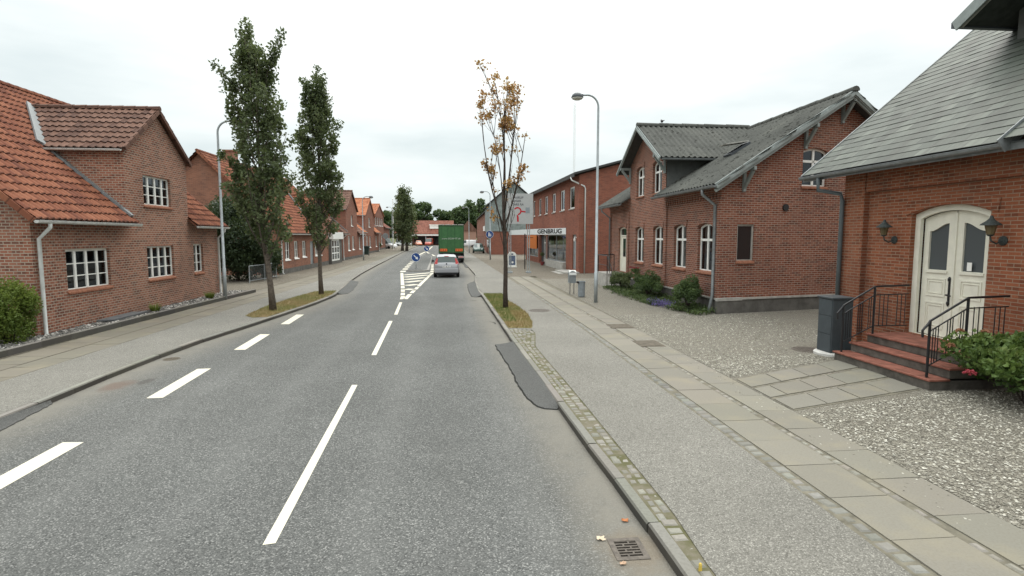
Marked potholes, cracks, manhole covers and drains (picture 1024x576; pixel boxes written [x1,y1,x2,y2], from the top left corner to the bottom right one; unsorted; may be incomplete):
drain grate [607,537,651,561]
